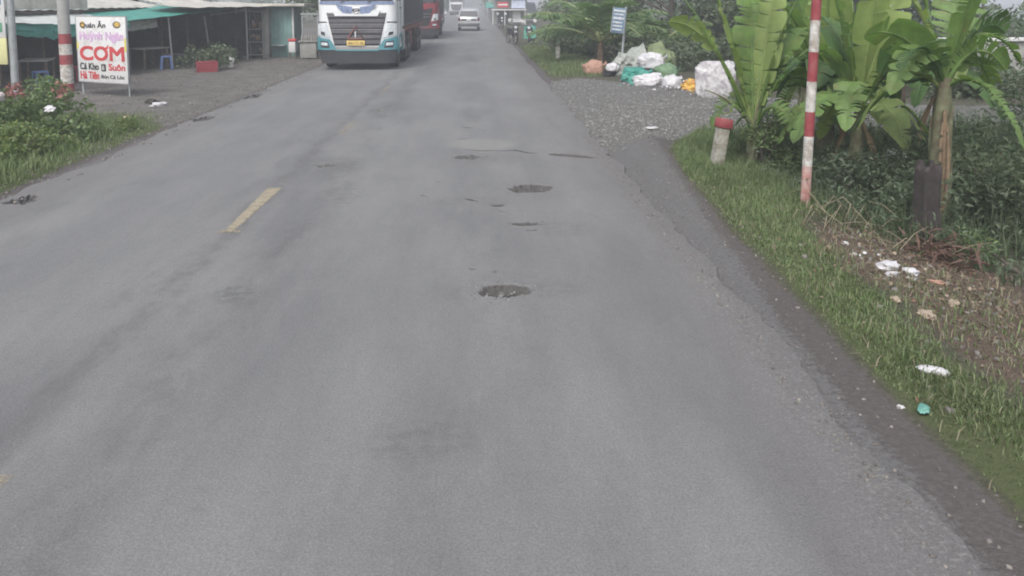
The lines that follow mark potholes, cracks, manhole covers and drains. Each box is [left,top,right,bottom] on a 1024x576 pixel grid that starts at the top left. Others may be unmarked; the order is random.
pothole [465,279,546,303]
pothole [507,182,555,194]
